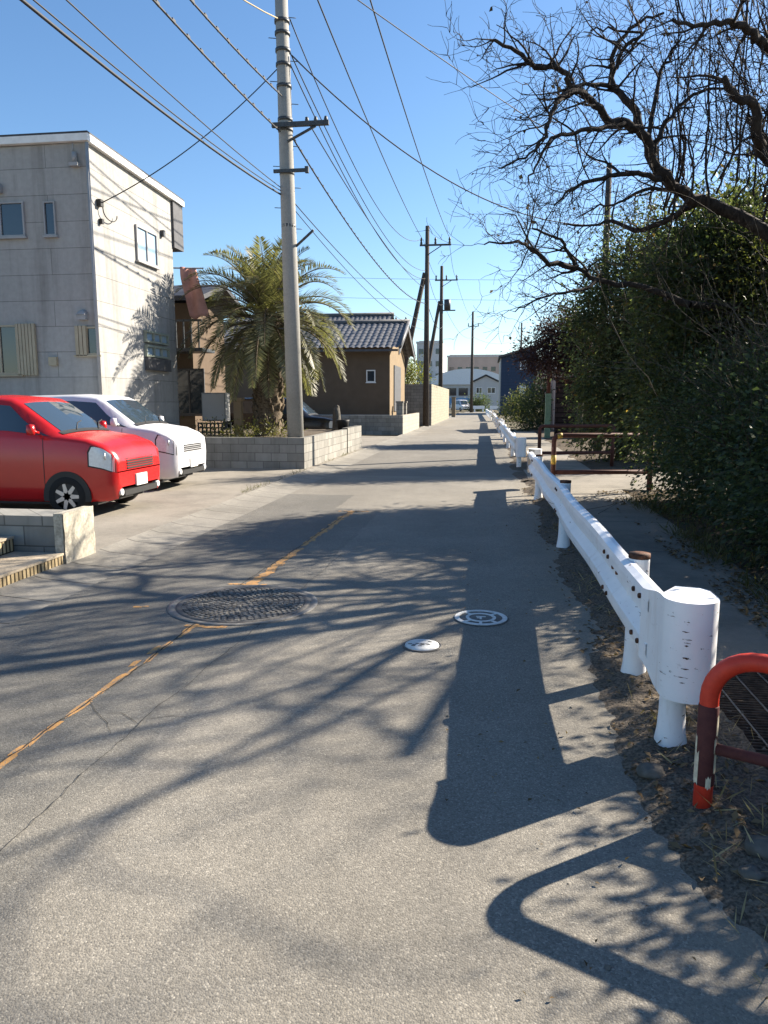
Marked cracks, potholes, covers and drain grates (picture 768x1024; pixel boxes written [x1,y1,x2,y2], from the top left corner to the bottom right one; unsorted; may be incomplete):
manhole cover [453,610,509,626]
manhole cover [167,585,318,626]
manhole cover [402,639,442,652]
